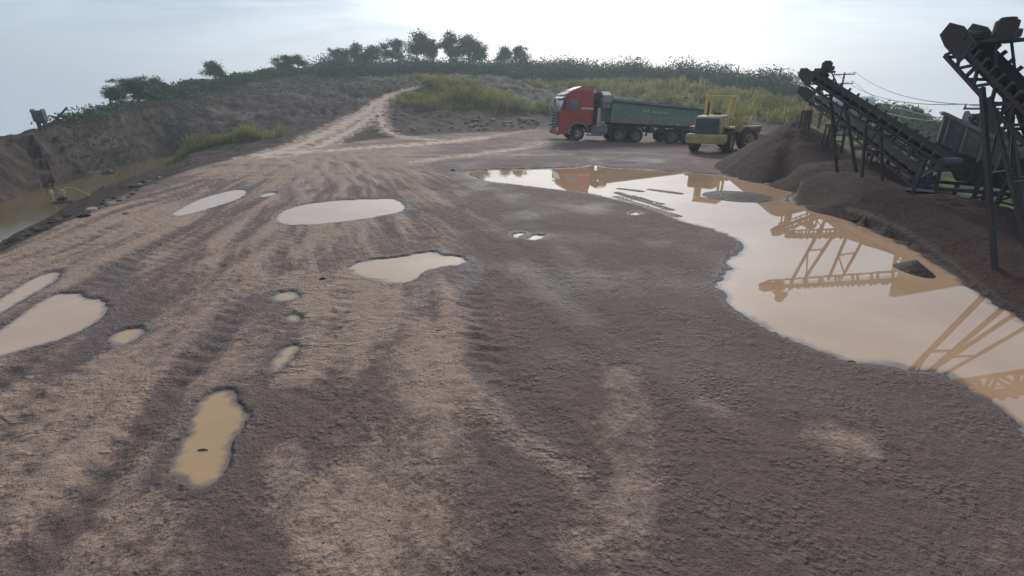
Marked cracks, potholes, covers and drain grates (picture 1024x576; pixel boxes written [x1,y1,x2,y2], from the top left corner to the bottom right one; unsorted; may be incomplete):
pothole [92,322,158,350]
pothole [250,190,287,198]
pothole [0,289,120,361]
pothole [150,381,263,501]
pothole [261,287,309,304]
pothole [255,338,313,377]
pothole [340,249,477,287]
pothole [519,233,550,241]
pothole [159,187,256,218]
pothole [273,309,312,325]
pothole [506,231,532,239]
